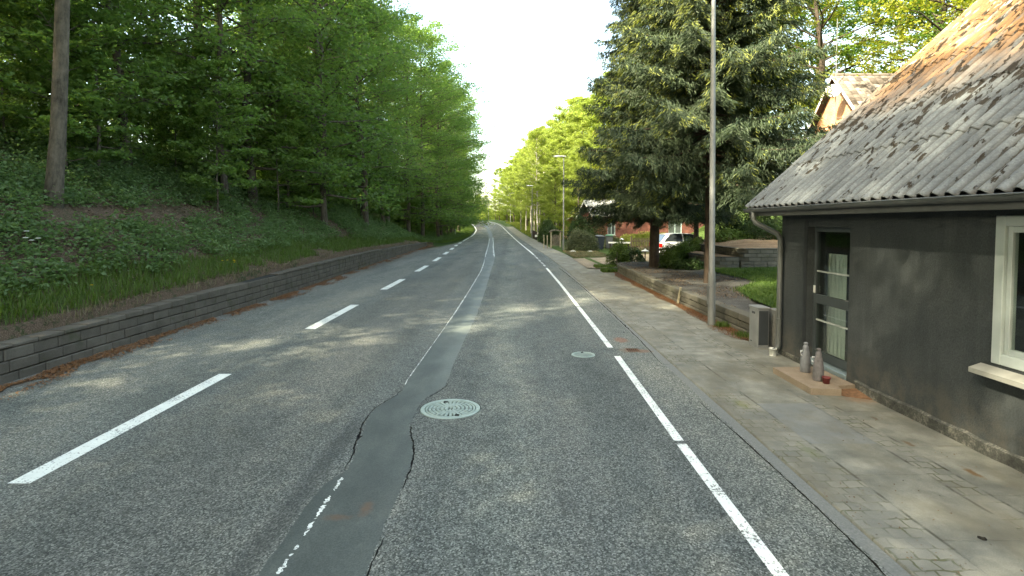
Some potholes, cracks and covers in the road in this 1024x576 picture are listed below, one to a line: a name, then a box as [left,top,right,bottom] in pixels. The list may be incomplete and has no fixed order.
crack [403,426,415,488]
manhole cover [420,399,481,419]
crack [344,390,402,471]
crack [366,535,386,576]
